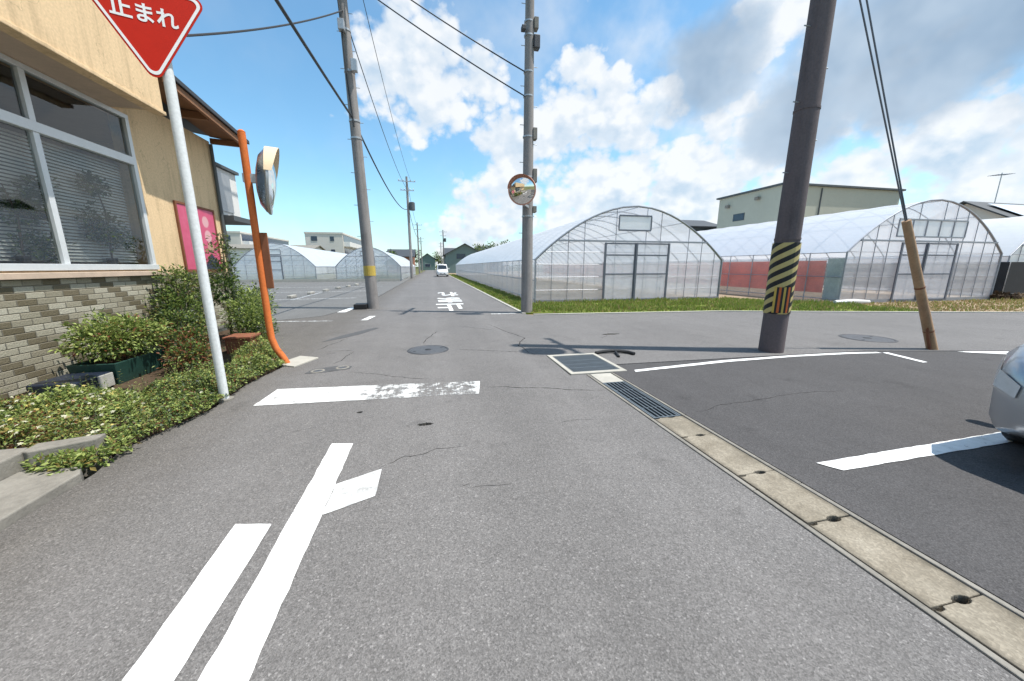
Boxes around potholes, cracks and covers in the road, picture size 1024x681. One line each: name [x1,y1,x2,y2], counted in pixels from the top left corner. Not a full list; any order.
drain grate [602,381,681,419]
manhole cover [838,334,899,343]
manhole cover [407,345,449,355]
